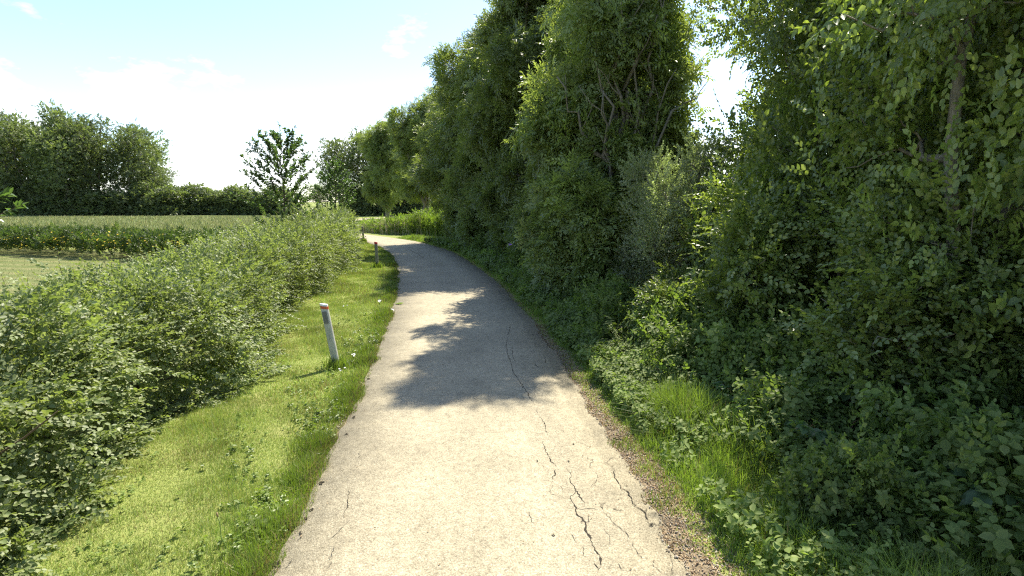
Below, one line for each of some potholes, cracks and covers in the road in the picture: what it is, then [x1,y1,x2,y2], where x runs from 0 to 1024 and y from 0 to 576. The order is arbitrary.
crack [507,327,673,571]
